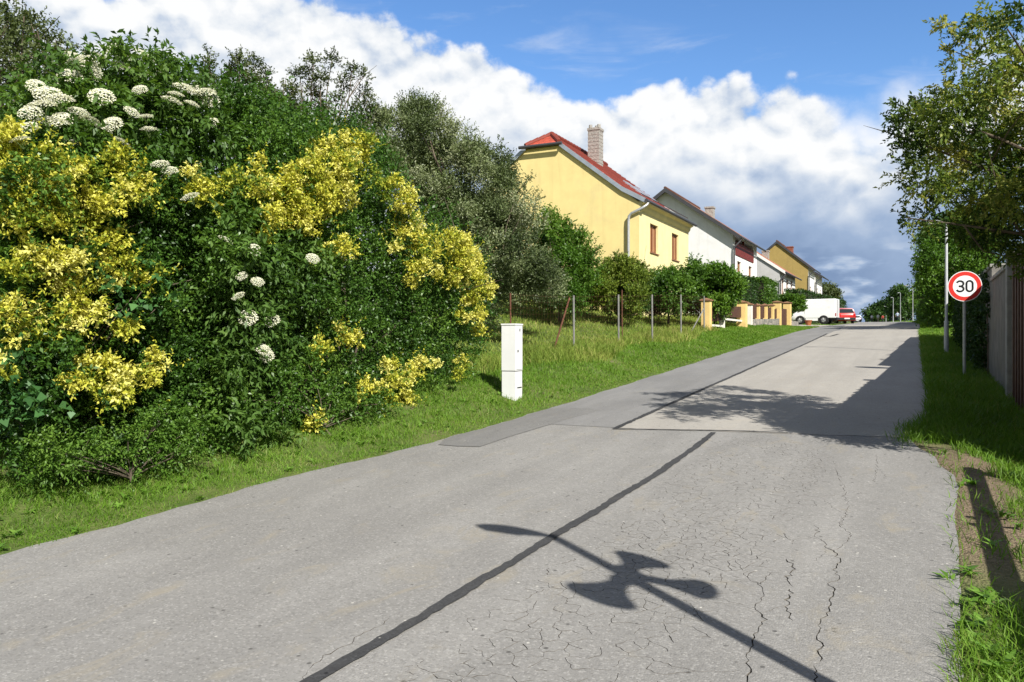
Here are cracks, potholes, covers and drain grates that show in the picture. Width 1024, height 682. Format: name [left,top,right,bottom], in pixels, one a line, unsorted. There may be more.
crack [302,619,388,679]
crack [810,456,881,682]
crack [405,437,835,682]
